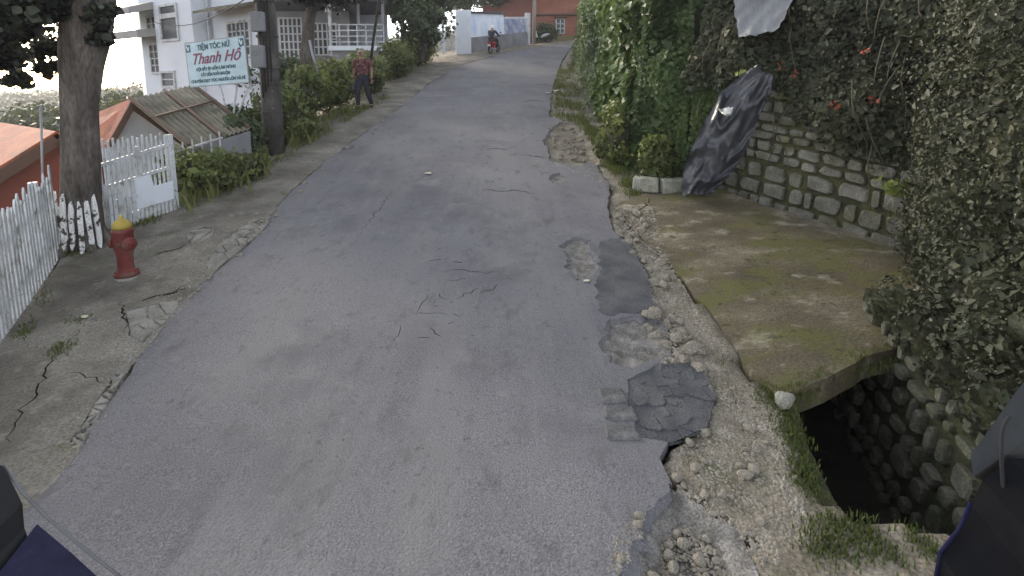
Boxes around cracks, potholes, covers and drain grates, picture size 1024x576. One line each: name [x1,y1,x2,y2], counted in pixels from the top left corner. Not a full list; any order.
pothole [598,316,673,368]
crack [395,259,512,345]
pothole [542,122,602,165]
pothole [559,237,600,281]
pothole [549,173,569,184]
